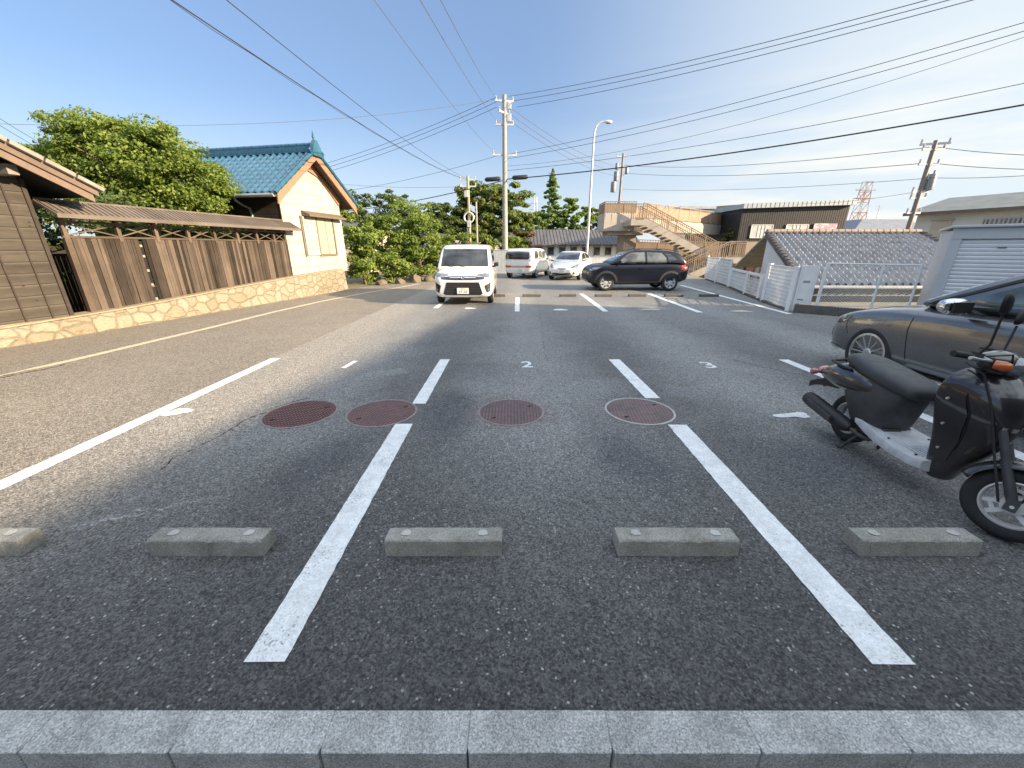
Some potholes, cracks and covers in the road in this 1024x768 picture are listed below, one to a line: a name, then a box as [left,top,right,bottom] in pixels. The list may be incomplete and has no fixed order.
manhole cover [478,399,544,426]
crack [159,398,307,470]
manhole cover [259,400,339,429]
manhole cover [345,399,417,428]
manhole cover [604,398,676,425]
